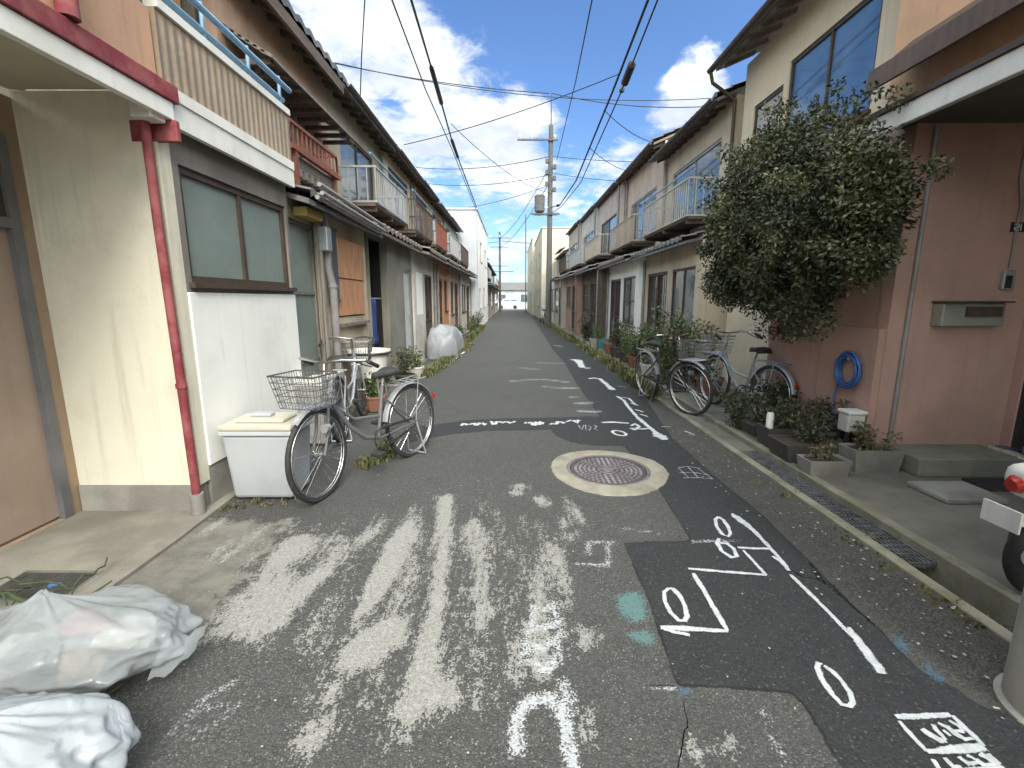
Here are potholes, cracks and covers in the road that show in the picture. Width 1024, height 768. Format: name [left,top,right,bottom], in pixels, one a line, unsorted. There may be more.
manhole cover [550,450,669,496]
drain grate [740,451,937,569]
crack [677,703,688,768]
